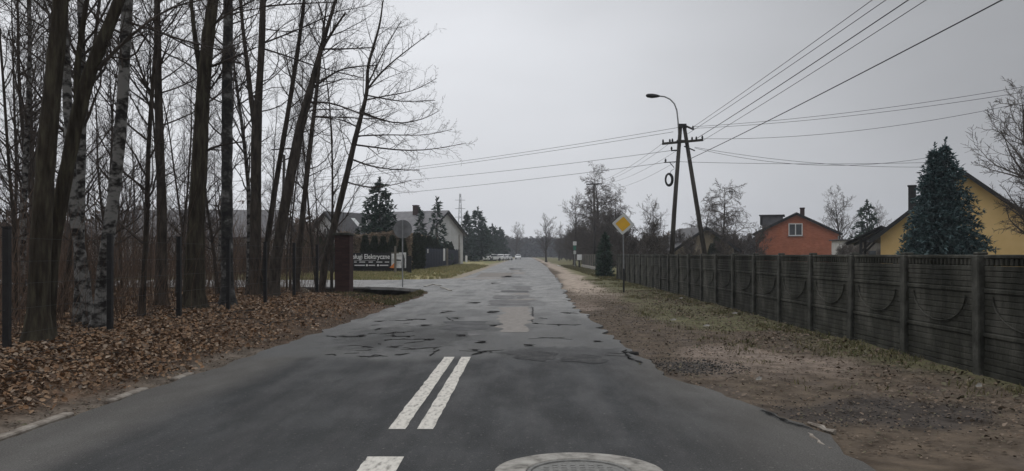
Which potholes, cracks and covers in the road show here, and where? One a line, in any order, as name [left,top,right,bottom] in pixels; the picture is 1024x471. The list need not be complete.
manhole cover [495,452,663,471]
crack [530,307,582,339]
crack [609,349,644,365]
